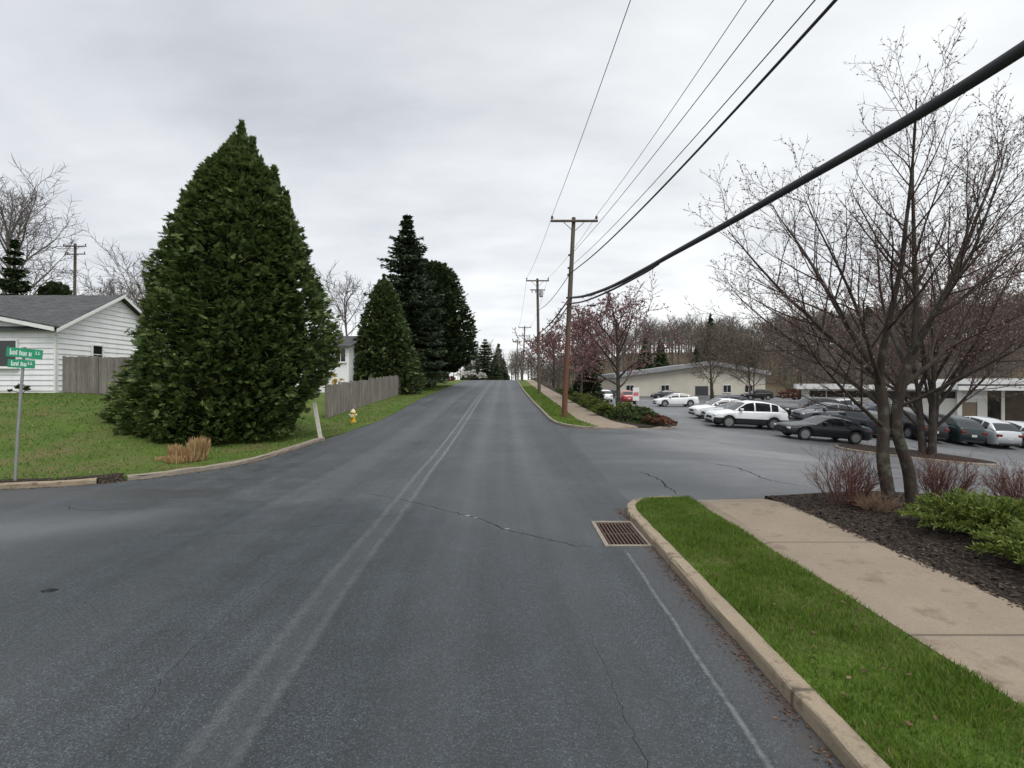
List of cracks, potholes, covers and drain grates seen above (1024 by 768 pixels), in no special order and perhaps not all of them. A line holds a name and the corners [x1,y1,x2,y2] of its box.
crack [592,636,649,768]
crack [174,494,590,547]
drain grate [591,521,652,547]
